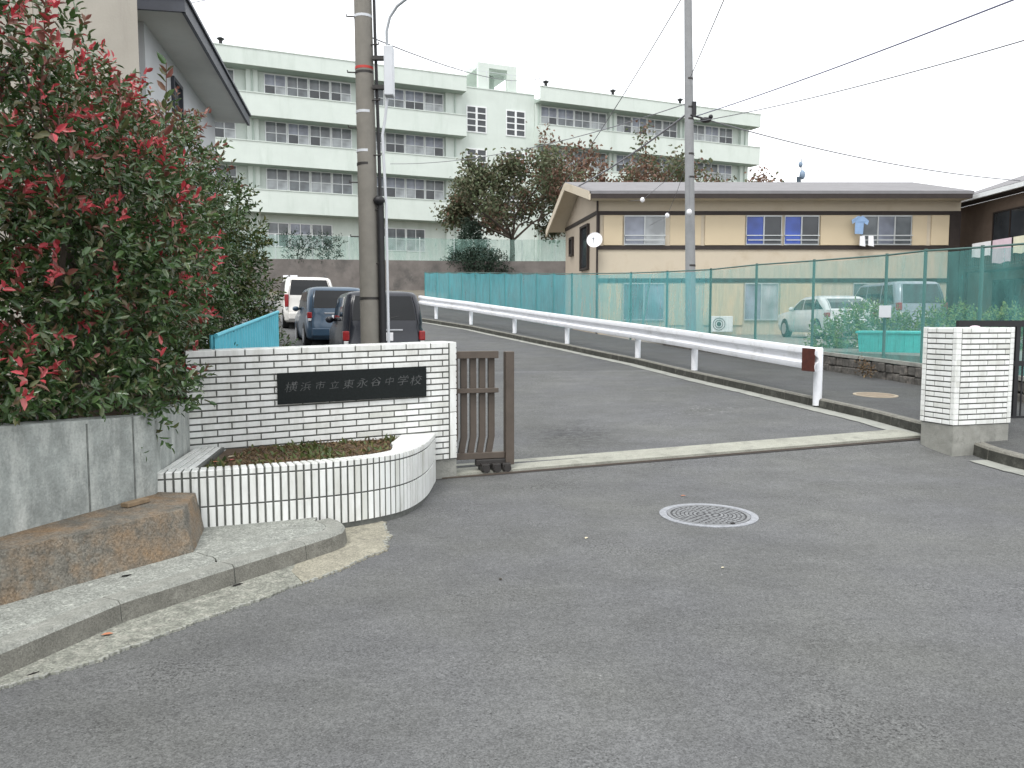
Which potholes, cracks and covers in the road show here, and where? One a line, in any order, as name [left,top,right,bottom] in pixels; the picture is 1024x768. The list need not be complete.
manhole cover [659,503,759,528]
